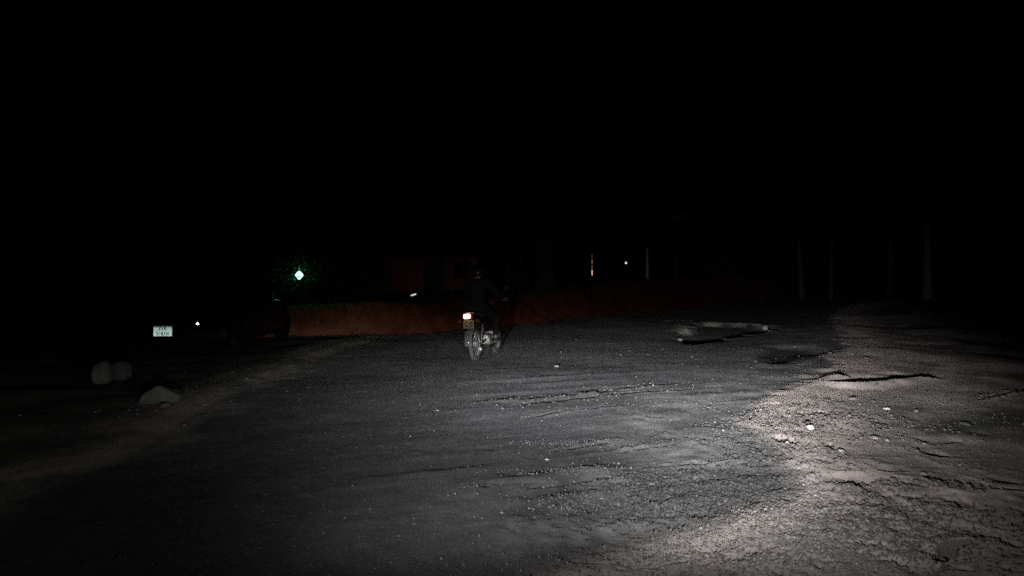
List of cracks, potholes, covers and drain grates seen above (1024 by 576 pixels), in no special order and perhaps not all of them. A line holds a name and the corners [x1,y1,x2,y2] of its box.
pothole [672,322,781,345]
crack [974,390,1024,400]
pothole [743,345,830,365]
crack [480,383,724,420]
